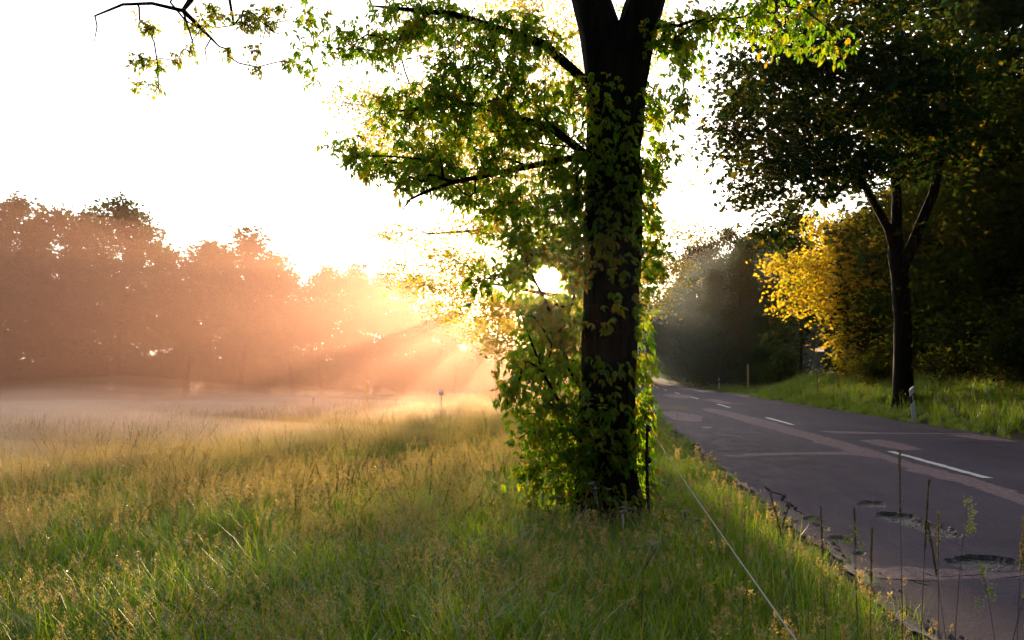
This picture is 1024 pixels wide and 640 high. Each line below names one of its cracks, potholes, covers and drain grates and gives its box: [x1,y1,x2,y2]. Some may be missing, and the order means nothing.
pothole [943,554,1024,572]
pothole [825,535,857,544]
pothole [875,511,963,540]
pothole [856,500,887,508]
